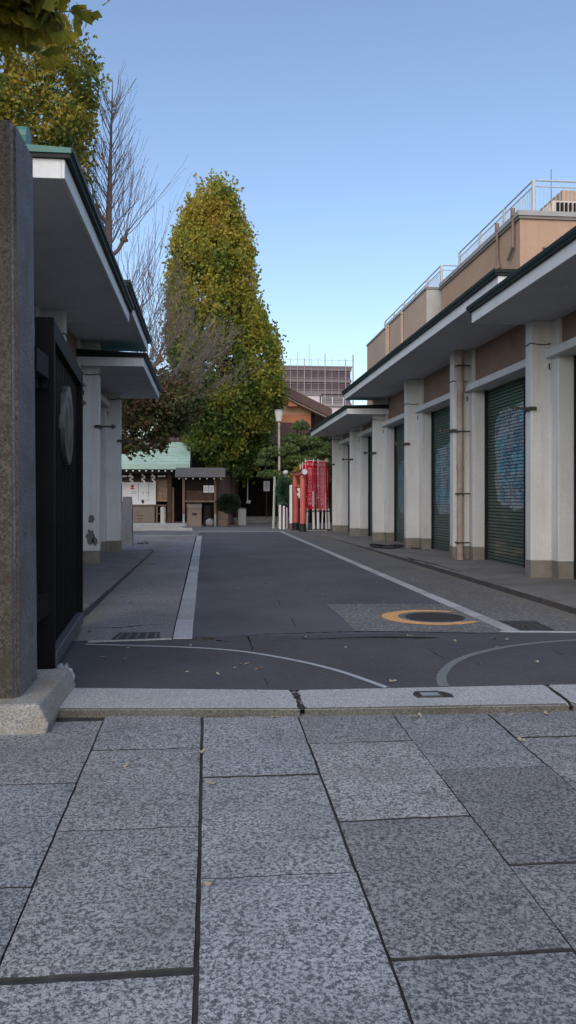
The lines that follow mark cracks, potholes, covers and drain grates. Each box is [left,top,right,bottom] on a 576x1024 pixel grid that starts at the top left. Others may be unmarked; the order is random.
manhole cover [405,613,465,622]
drain grate [110,632,160,640]
